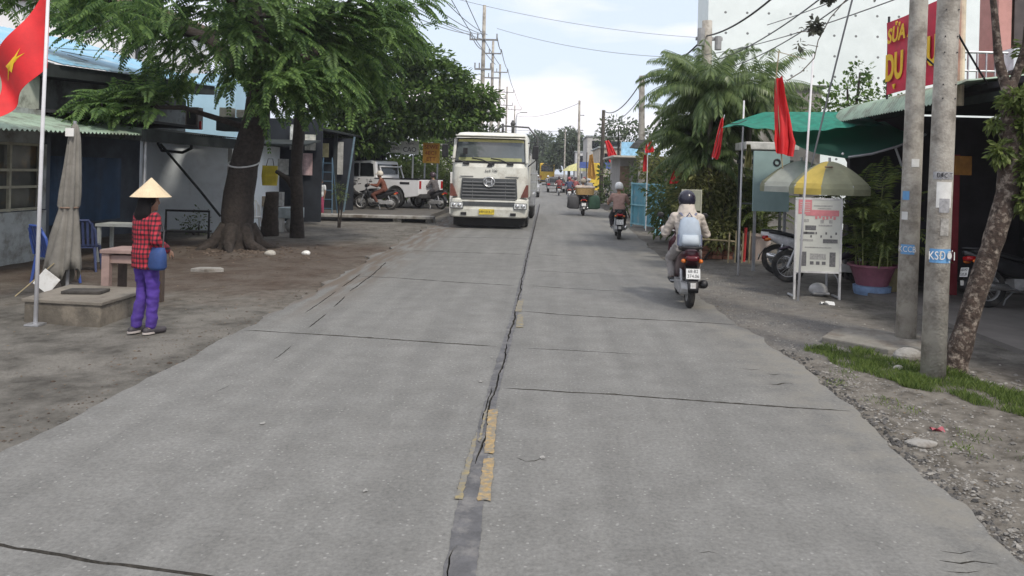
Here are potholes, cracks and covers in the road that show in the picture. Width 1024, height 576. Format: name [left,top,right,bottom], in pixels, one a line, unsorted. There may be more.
crack [943,551,992,573]
crack [249,263,514,360]
